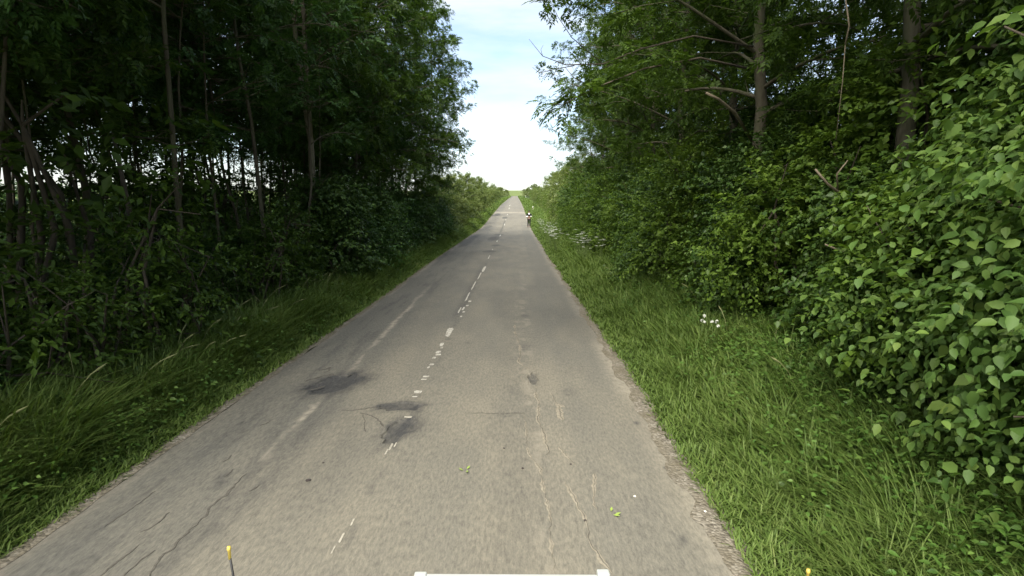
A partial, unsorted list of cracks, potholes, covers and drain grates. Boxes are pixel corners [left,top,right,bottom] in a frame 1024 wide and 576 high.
crack [513,325,613,574]
crack [343,407,384,432]
pothole [526,370,540,387]
crack [100,456,259,576]
